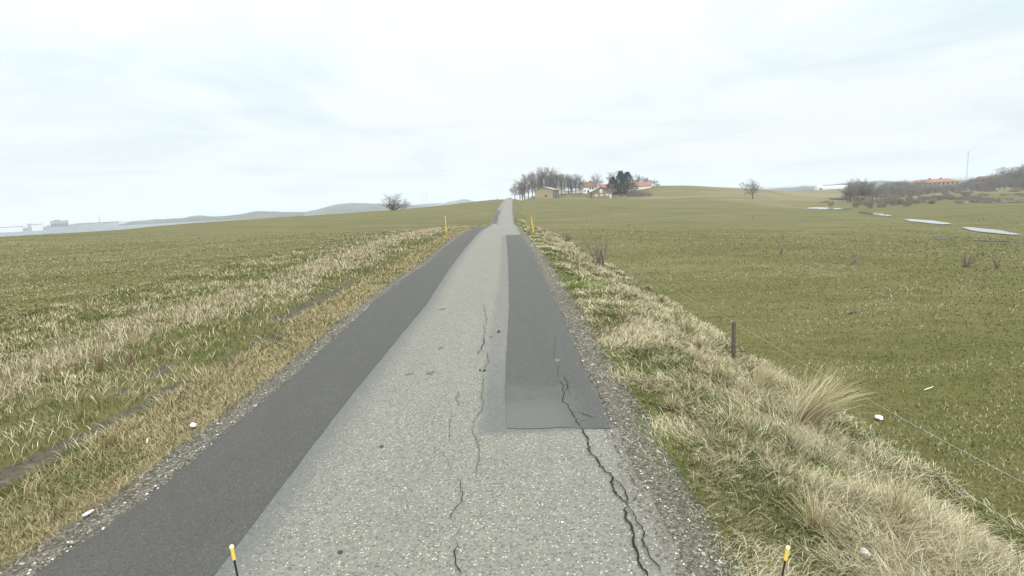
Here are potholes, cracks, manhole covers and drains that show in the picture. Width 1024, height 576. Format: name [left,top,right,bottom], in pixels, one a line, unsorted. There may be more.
crack [443,306,489,576]
crack [553,346,661,576]
